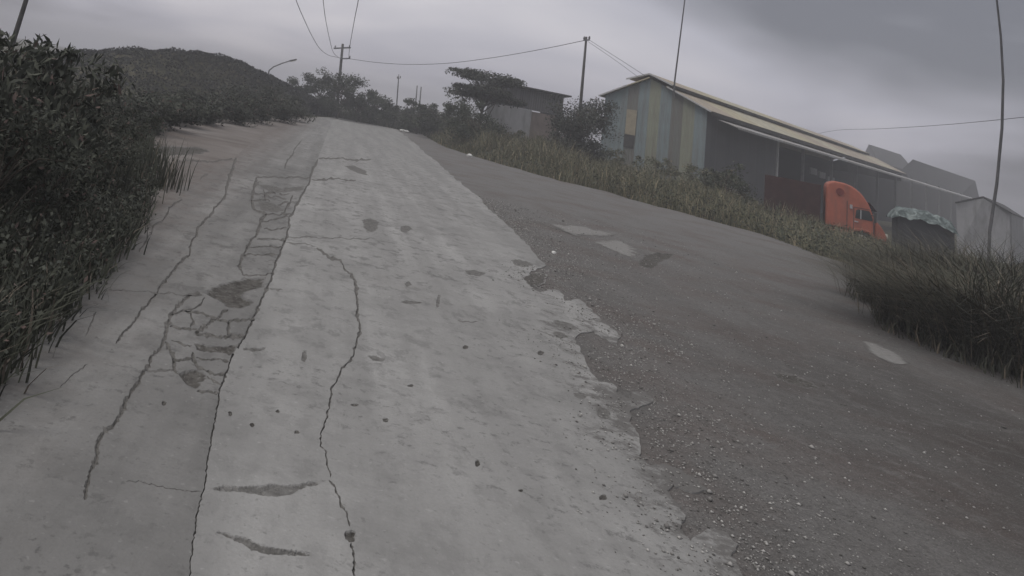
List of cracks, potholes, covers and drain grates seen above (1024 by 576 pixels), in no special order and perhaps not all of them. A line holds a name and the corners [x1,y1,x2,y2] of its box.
pothole [201,277,266,309]
crack [60,140,362,526]
